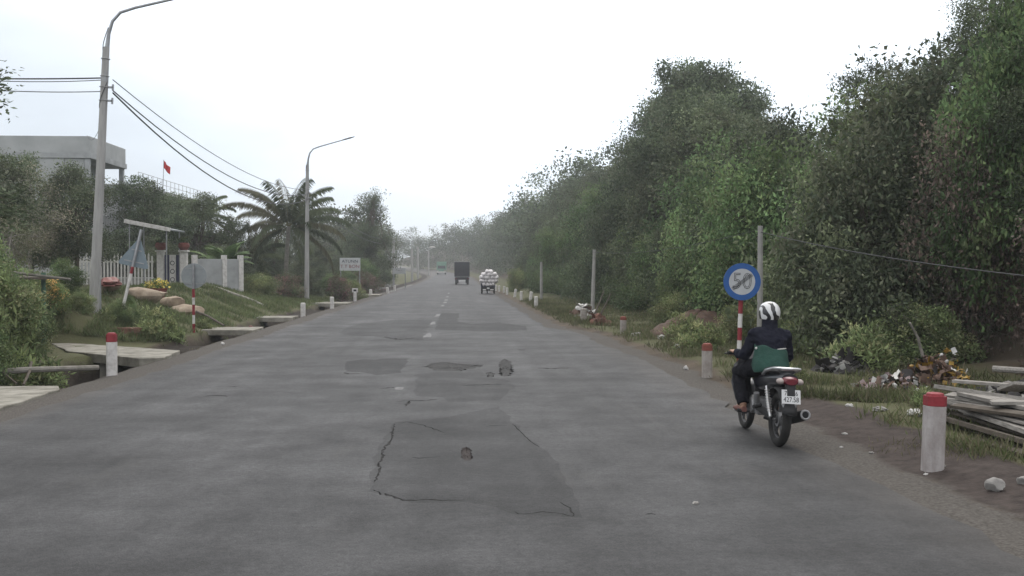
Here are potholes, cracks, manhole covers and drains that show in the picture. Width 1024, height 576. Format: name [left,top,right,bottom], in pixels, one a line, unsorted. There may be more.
pothole [498,359,514,376]
pothole [461,447,473,461]
crack [374,387,447,501]
